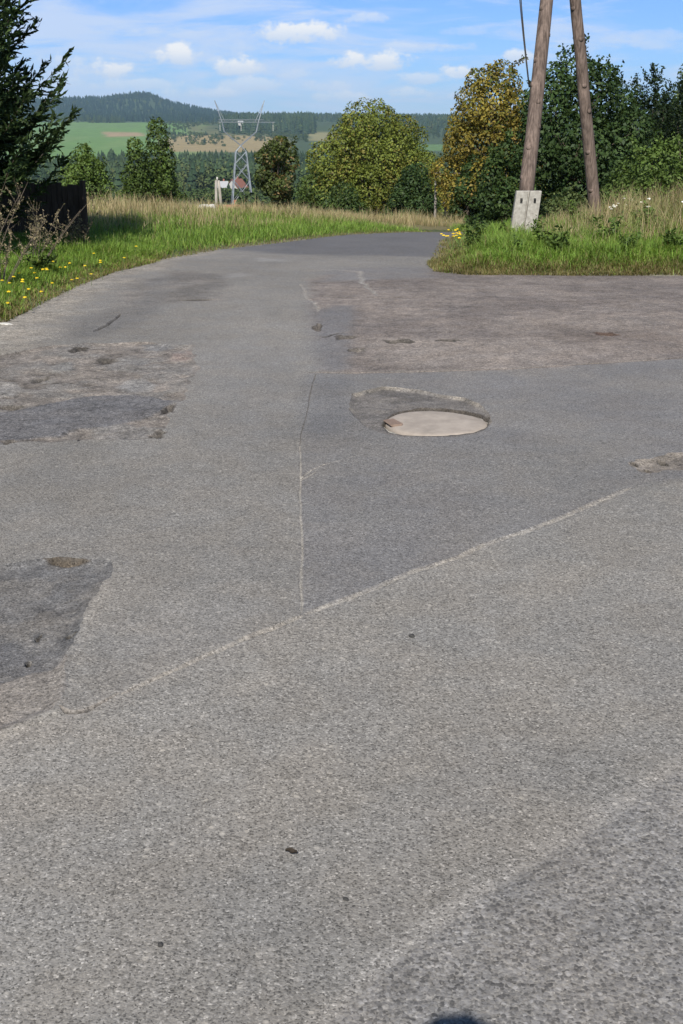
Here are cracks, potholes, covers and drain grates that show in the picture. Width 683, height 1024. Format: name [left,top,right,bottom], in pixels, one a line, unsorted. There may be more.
crack [93,312,121,332]
crack [59,357,683,714]
manhole cover [383,411,488,436]
